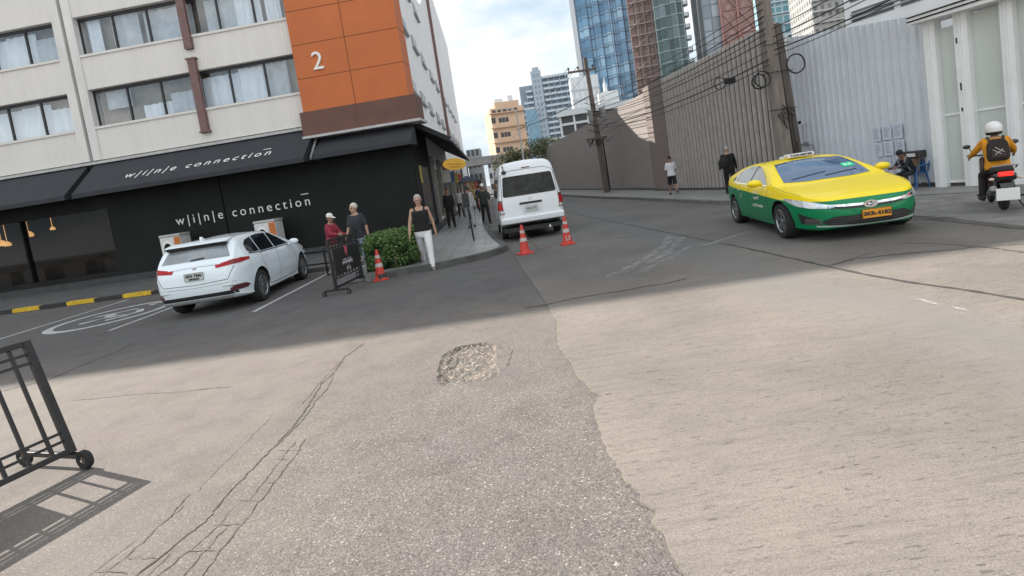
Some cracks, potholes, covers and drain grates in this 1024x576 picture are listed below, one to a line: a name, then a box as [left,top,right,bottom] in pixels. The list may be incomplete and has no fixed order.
pothole [437,342,513,385]
crack [88,343,364,576]
